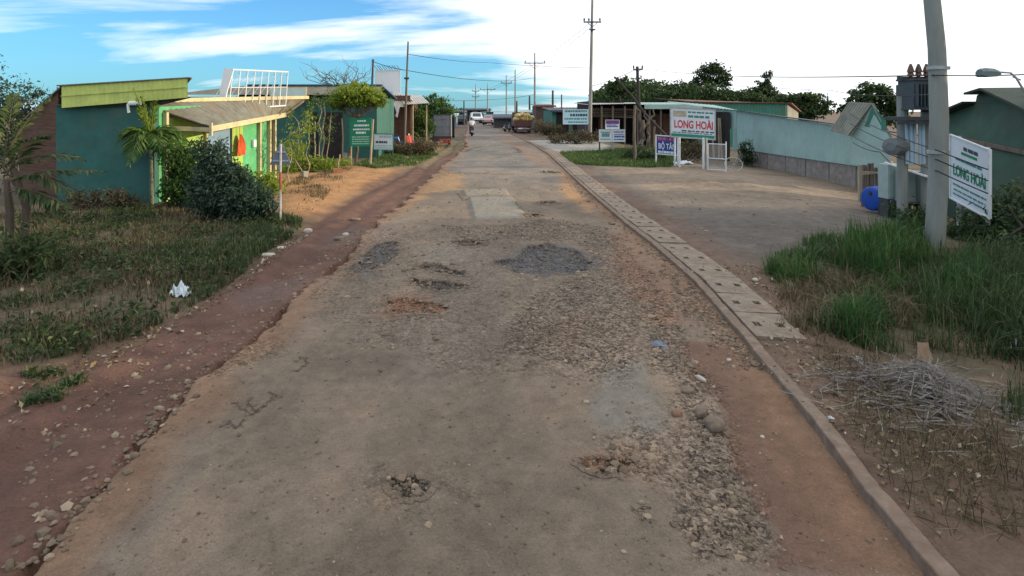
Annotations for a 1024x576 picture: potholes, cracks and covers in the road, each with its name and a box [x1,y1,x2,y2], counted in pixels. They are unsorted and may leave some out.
crack [291,356,310,372]
crack [219,391,283,429]
pothole [570,451,650,478]
pothole [378,469,439,504]
pothole [381,296,457,317]
